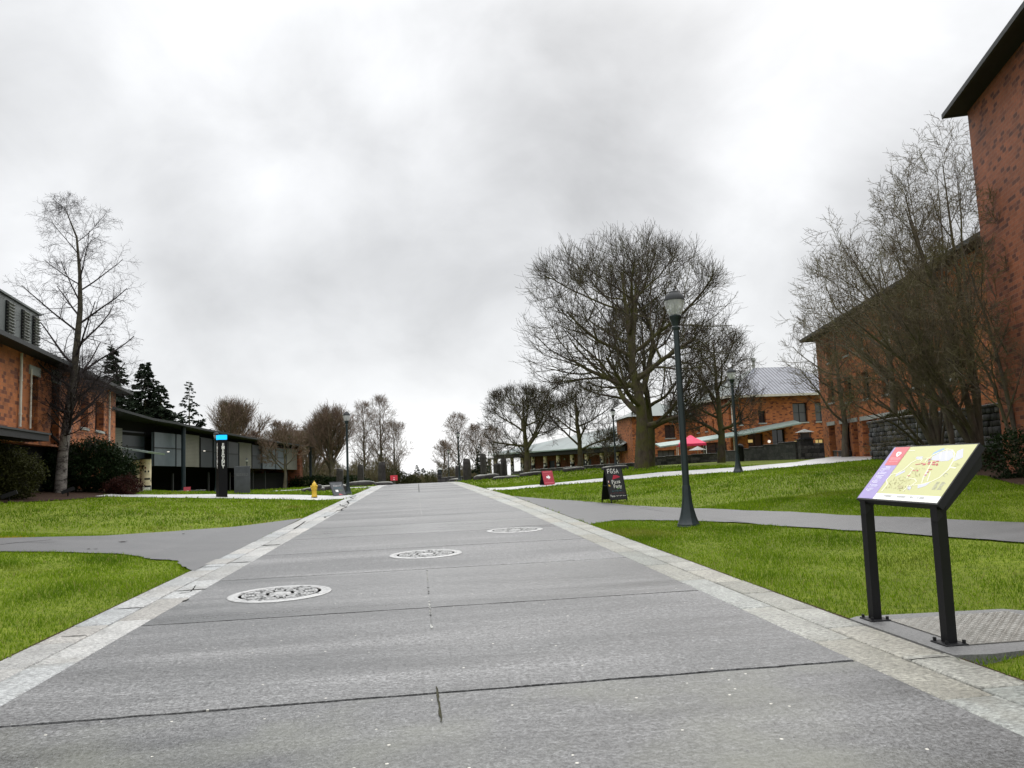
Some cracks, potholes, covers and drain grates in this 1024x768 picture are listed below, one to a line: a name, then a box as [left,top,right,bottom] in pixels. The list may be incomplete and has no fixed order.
manhole cover [227,585,332,603]
manhole cover [389,549,462,559]
